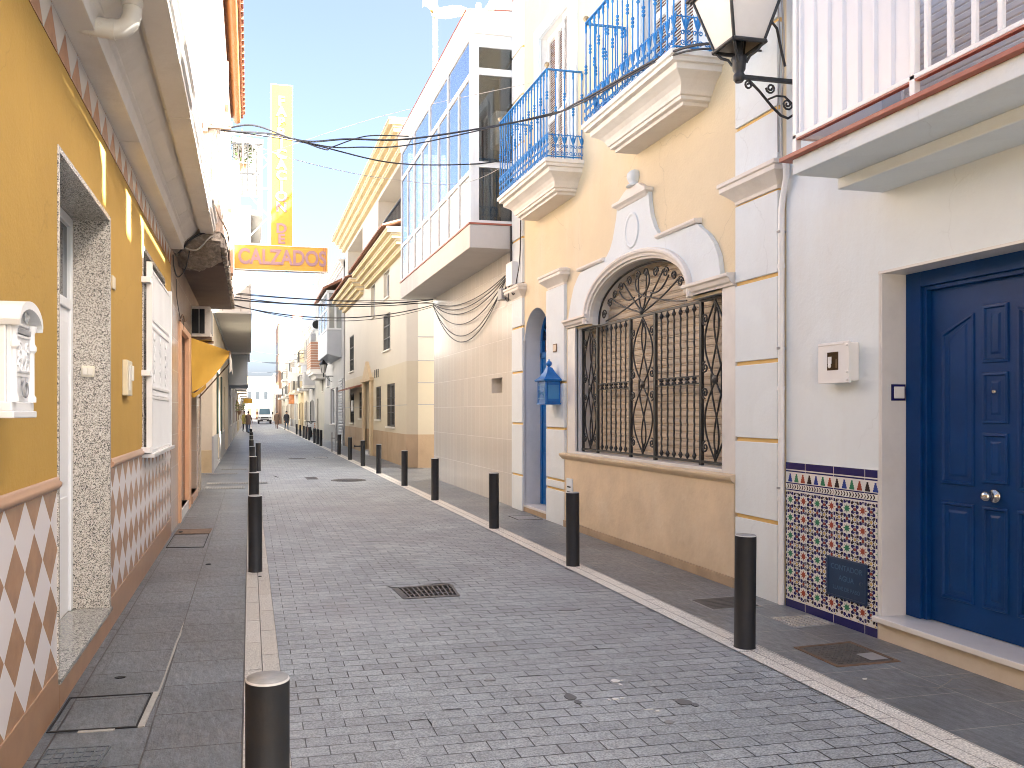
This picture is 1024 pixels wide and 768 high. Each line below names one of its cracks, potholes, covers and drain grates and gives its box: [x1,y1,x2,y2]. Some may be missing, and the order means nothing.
manhole cover [688,596,763,611]
manhole cover [46,691,160,733]
manhole cover [794,641,901,667]
manhole cover [166,534,209,548]
manhole cover [771,615,834,628]
drain grate [392,584,460,599]
